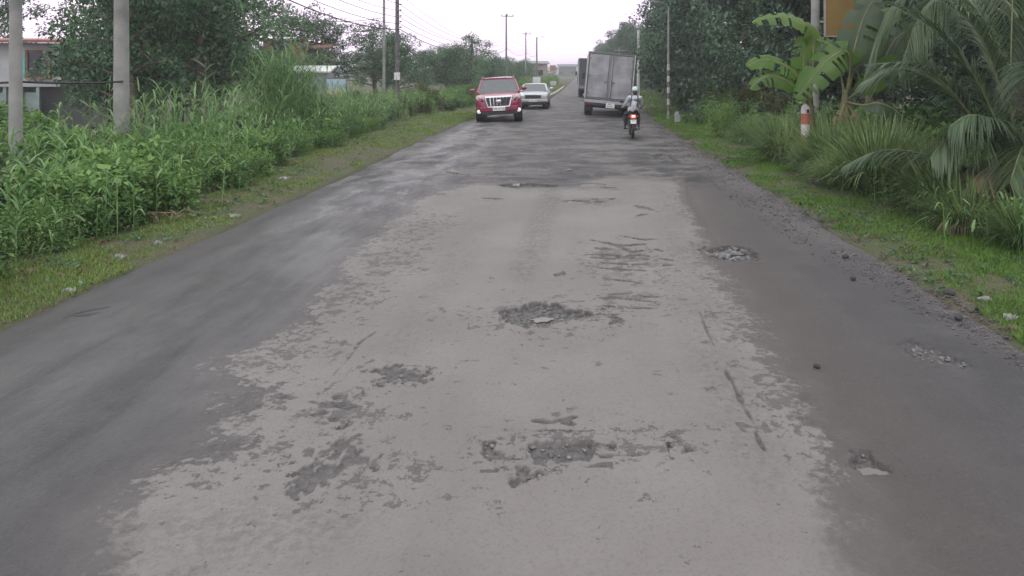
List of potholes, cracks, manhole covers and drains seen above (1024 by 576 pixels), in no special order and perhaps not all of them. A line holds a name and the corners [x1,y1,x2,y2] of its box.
pothole [346,355,452,399]
pothole [231,420,413,514]
pothole [510,429,620,477]
pothole [485,298,608,334]
crack [514,182,790,470]
pothole [702,244,773,266]
pothole [881,336,991,376]
